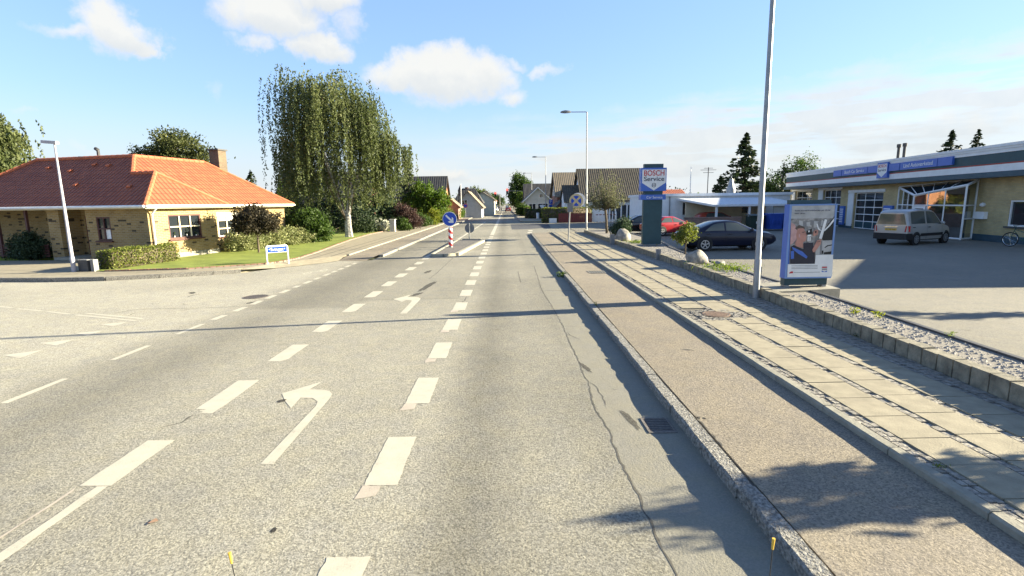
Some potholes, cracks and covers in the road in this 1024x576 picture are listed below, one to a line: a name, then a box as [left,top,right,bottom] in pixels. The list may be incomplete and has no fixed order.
drain grate [640,417,678,433]
crack [534,266,678,576]
